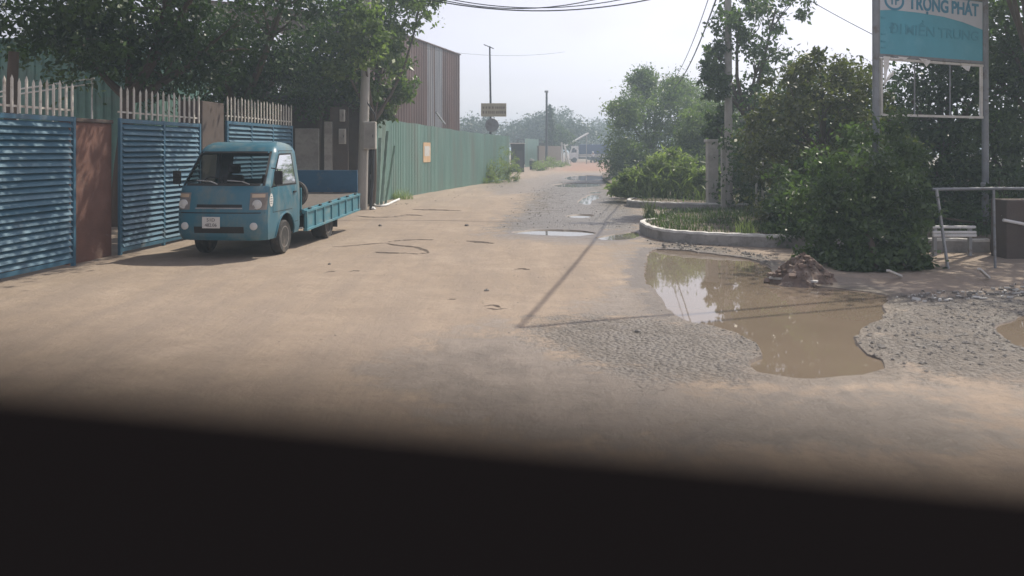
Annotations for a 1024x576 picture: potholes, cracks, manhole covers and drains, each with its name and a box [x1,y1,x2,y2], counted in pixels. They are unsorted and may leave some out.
pothole [644,249,891,379]
pothole [994,315,1024,347]
crack [325,239,432,273]
pothole [577,195,601,205]
